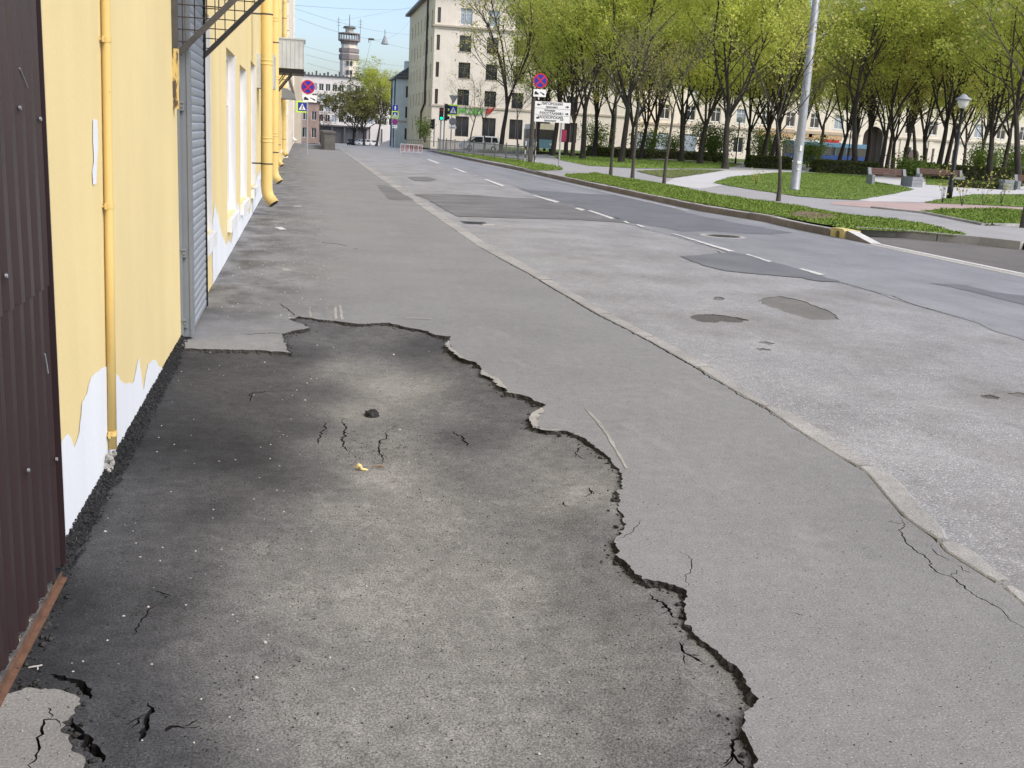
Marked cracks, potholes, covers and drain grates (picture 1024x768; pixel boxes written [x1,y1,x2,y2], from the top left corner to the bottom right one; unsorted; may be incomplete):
crack [650,554,692,619]
crack [127,703,199,742]
crack [317,419,349,450]
crack [27,674,106,768]
crack [679,642,706,665]
